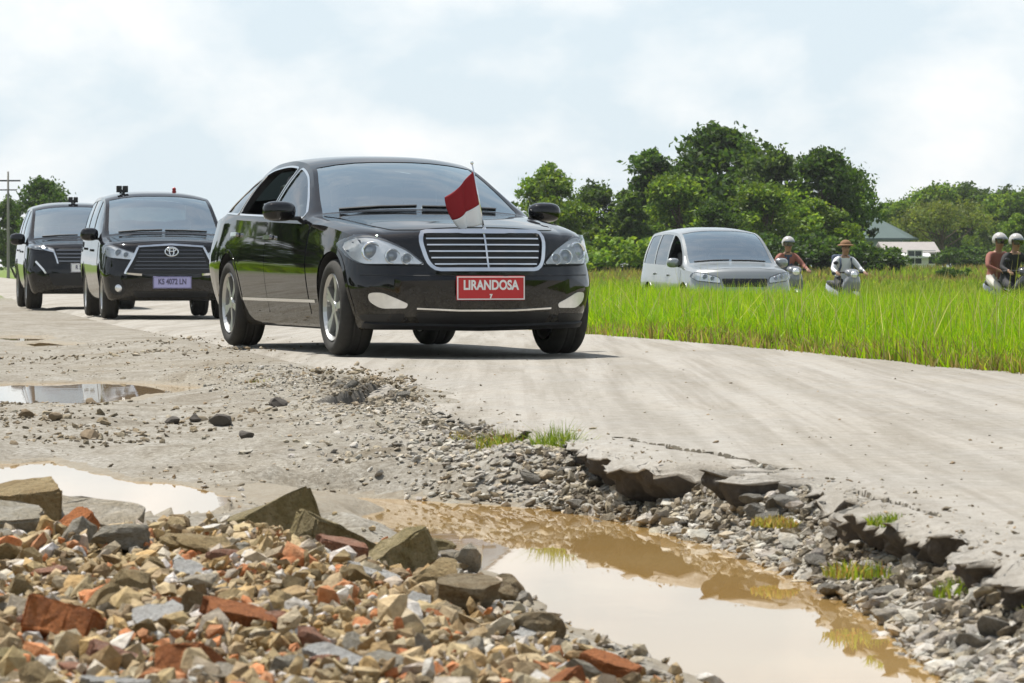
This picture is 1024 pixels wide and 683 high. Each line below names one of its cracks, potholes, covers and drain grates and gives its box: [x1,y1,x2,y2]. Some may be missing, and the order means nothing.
pothole [317,381,414,405]
crack [849,490,939,517]
pothole [0,457,255,517]
pothole [230,482,951,683]
crack [612,437,789,470]
pothole [0,380,215,403]
